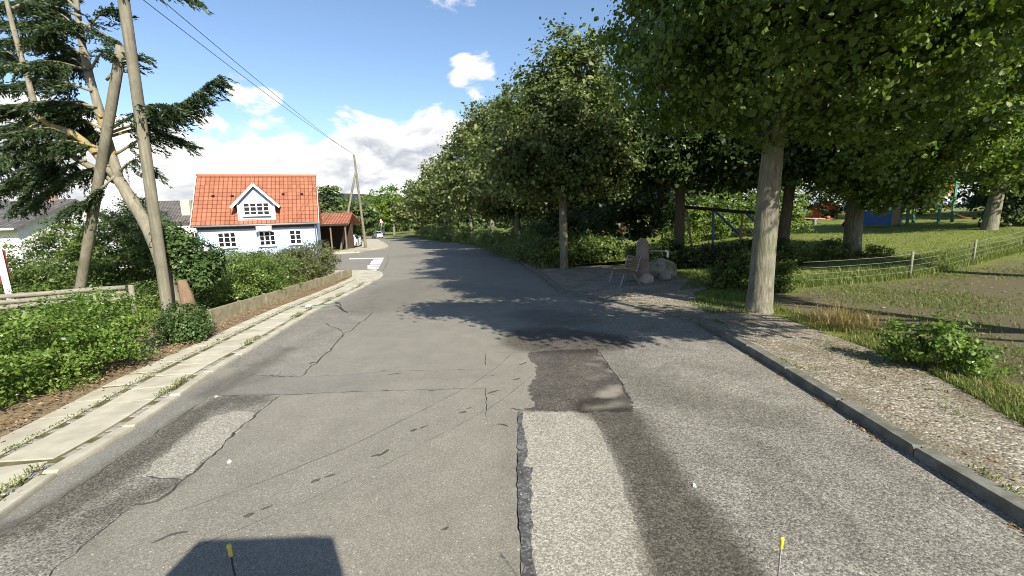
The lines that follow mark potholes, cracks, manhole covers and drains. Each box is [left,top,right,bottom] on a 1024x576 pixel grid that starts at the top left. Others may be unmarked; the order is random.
crack [0,312,531,576]
